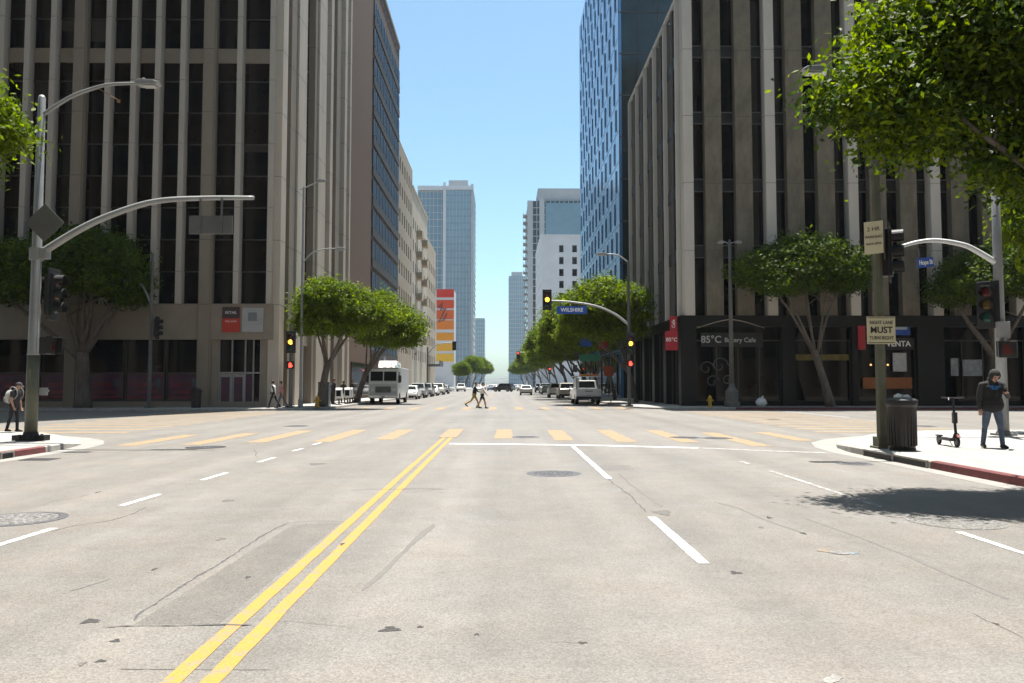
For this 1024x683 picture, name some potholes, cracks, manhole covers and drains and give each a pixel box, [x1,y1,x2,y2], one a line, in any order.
crack [609,474,663,512]
manhole cover [0,512,69,526]
